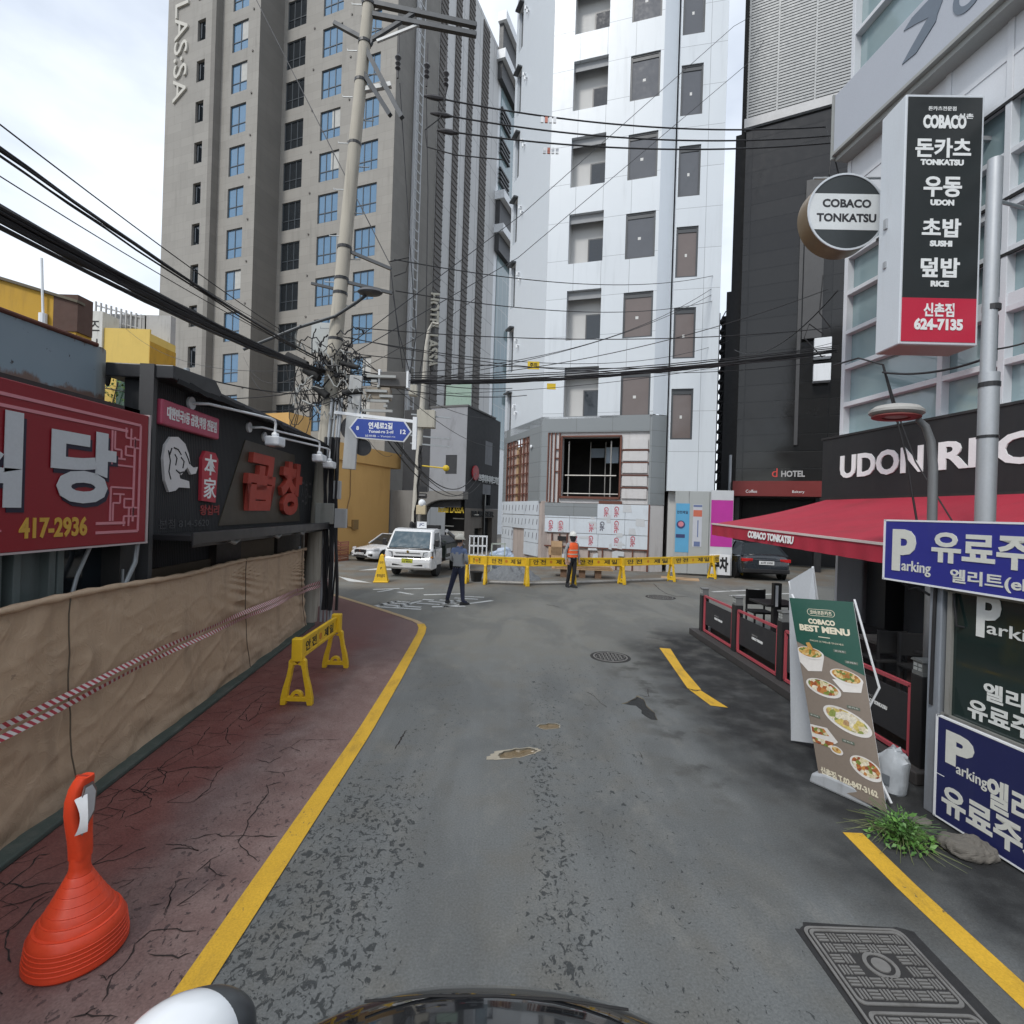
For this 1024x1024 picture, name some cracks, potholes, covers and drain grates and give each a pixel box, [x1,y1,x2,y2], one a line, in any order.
manhole cover [795,922,1001,1024]
manhole cover [590,651,631,663]
pothole [486,747,541,760]
